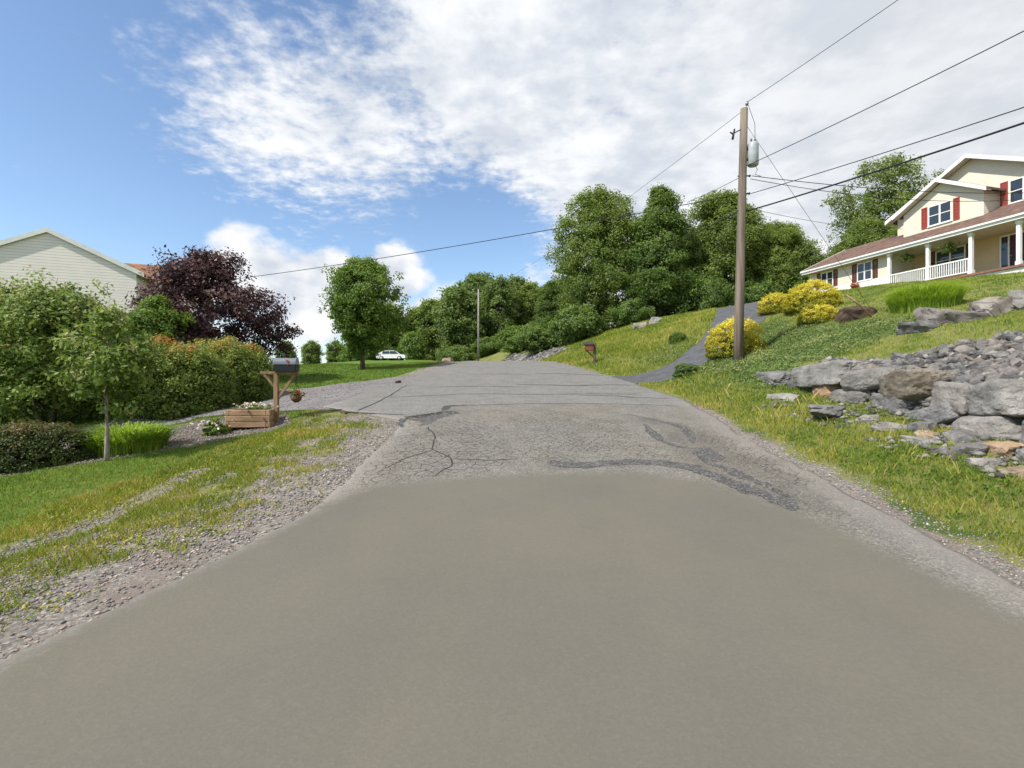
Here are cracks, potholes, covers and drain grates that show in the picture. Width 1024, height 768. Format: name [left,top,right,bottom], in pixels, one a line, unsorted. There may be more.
crack [357,385,500,411]
crack [353,416,520,485]
